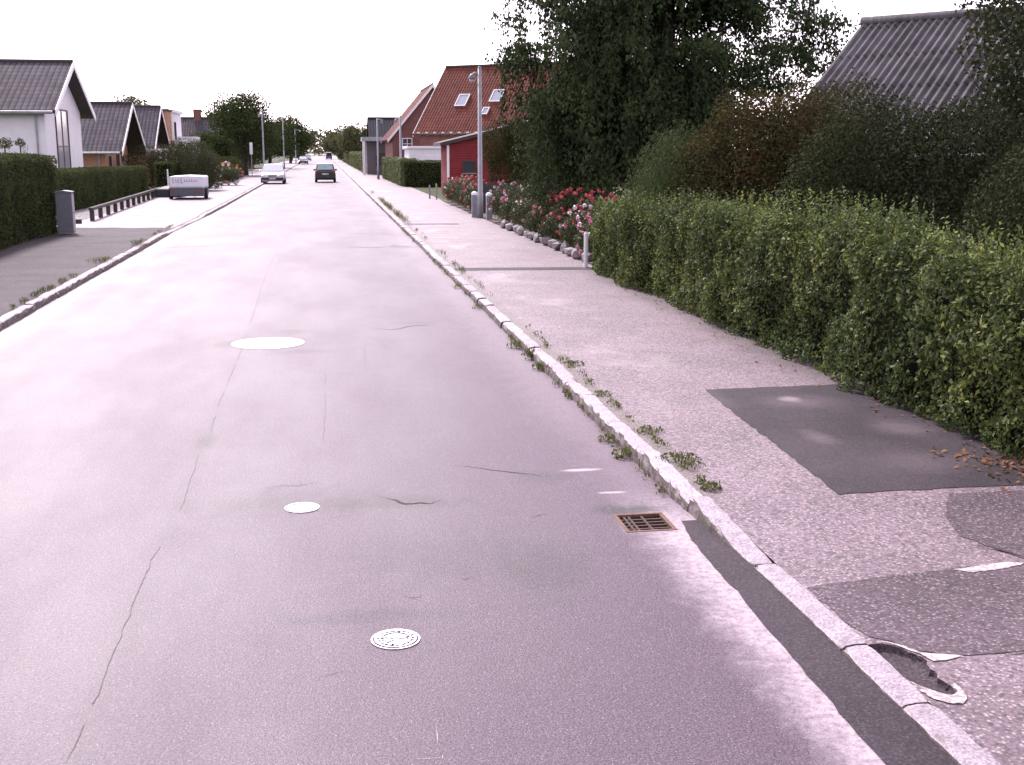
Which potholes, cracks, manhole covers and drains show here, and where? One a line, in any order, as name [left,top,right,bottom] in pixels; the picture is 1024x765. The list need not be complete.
manhole cover [285,502,319,513]
pothole [868,643,956,695]
manhole cover [231,337,305,349]
drain grate [613,512,678,533]
manhole cover [371,629,420,650]
